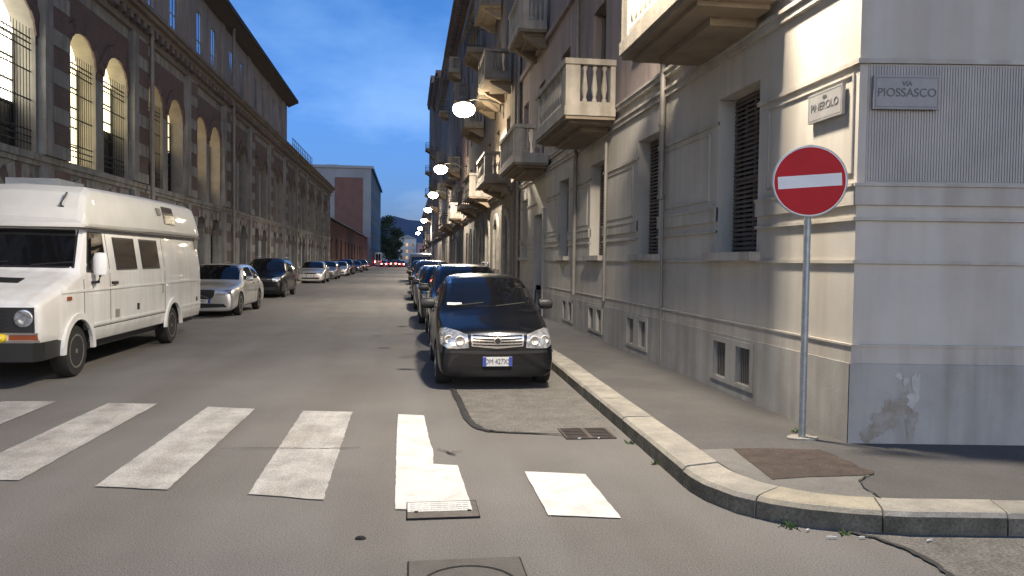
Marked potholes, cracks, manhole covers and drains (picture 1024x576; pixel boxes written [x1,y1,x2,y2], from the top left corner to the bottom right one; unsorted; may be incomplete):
manhole cover [407,500,480,521]
manhole cover [407,557,527,576]
drain grate [558,427,617,440]
